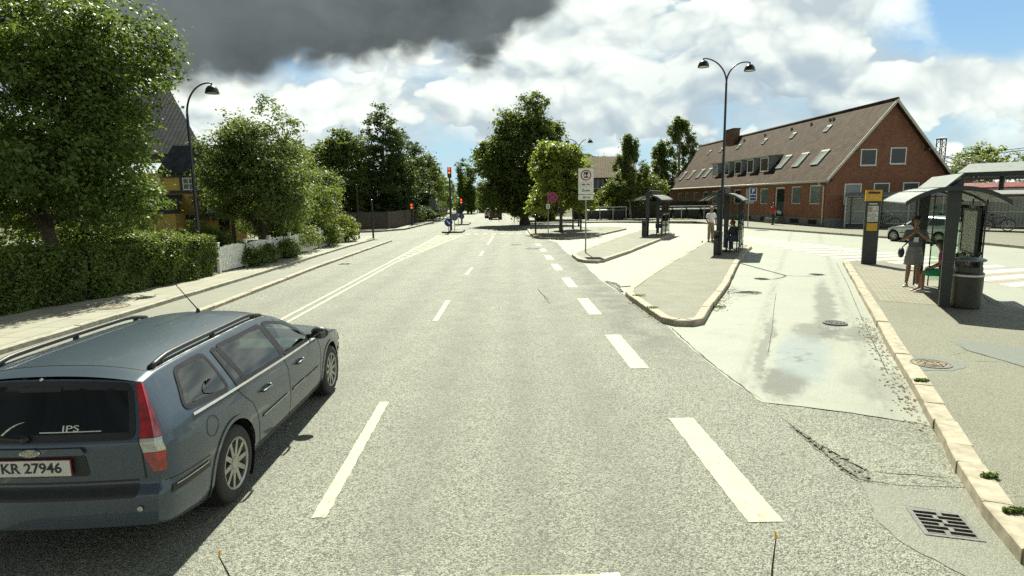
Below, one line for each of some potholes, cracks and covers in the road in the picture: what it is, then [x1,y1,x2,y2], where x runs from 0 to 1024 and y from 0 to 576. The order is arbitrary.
manhole cover [910,358,953,369]
drain grate [905,507,986,542]
